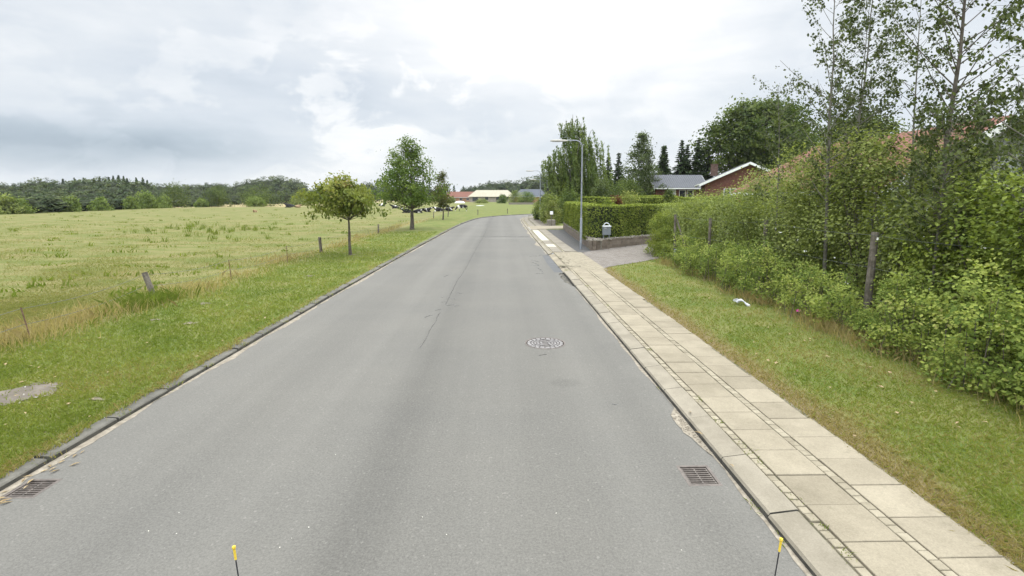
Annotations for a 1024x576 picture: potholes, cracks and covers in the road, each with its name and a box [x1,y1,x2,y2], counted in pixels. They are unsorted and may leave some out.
drain grate [676,465,723,486]
drain grate [1,479,62,499]
manhole cover [525,337,566,355]
crack [423,229,487,343]
